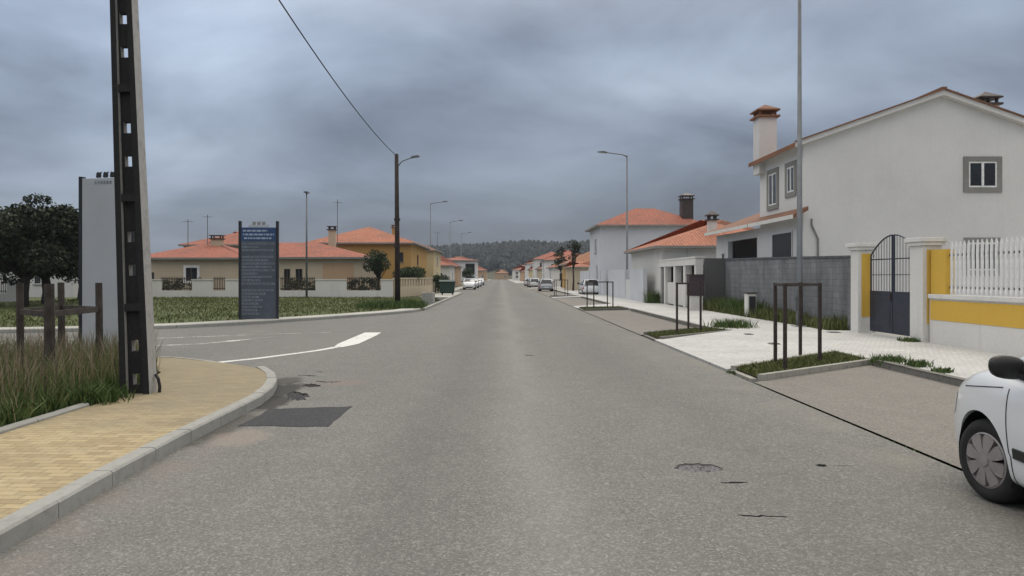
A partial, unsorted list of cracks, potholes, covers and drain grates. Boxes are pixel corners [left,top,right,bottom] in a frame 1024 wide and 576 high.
pothole [287,391,310,401]
pothole [675,463,723,473]
